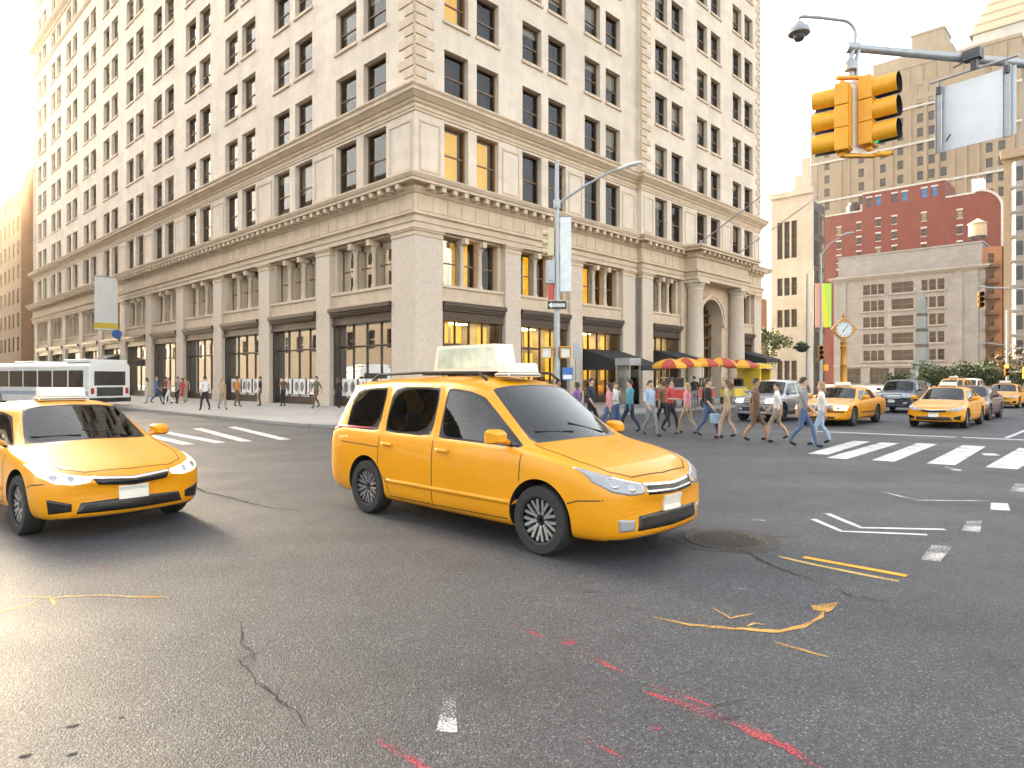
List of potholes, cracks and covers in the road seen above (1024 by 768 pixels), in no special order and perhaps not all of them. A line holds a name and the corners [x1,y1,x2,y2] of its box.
crack [239,620,307,726]
crack [197,488,298,511]
crack [732,536,819,581]
manhole cover [667,528,785,554]
